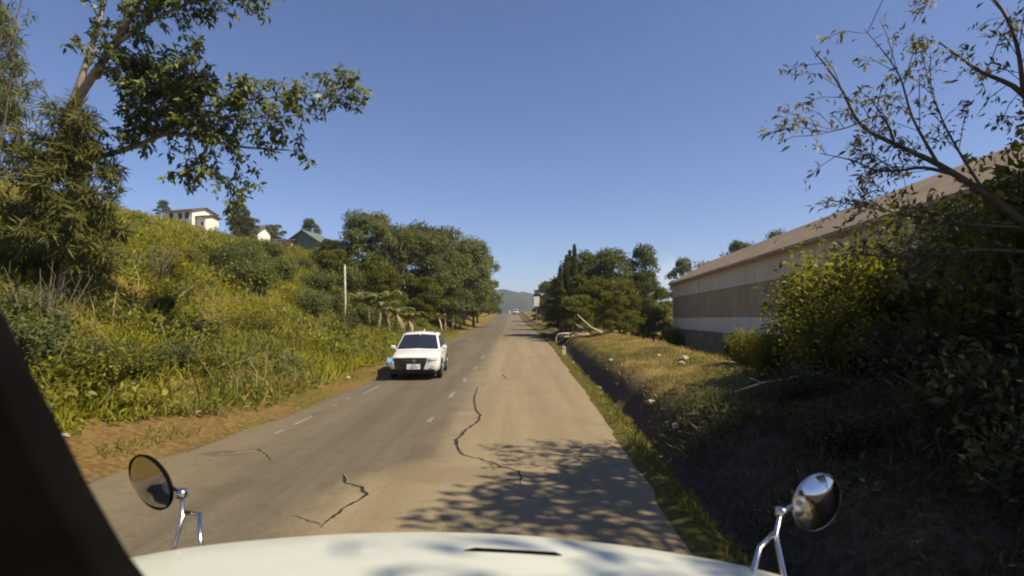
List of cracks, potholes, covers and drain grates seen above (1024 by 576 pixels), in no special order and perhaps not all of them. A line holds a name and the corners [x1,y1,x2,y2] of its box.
crack [453,374,523,484]
crack [217,449,272,460]
crack [291,473,369,527]
